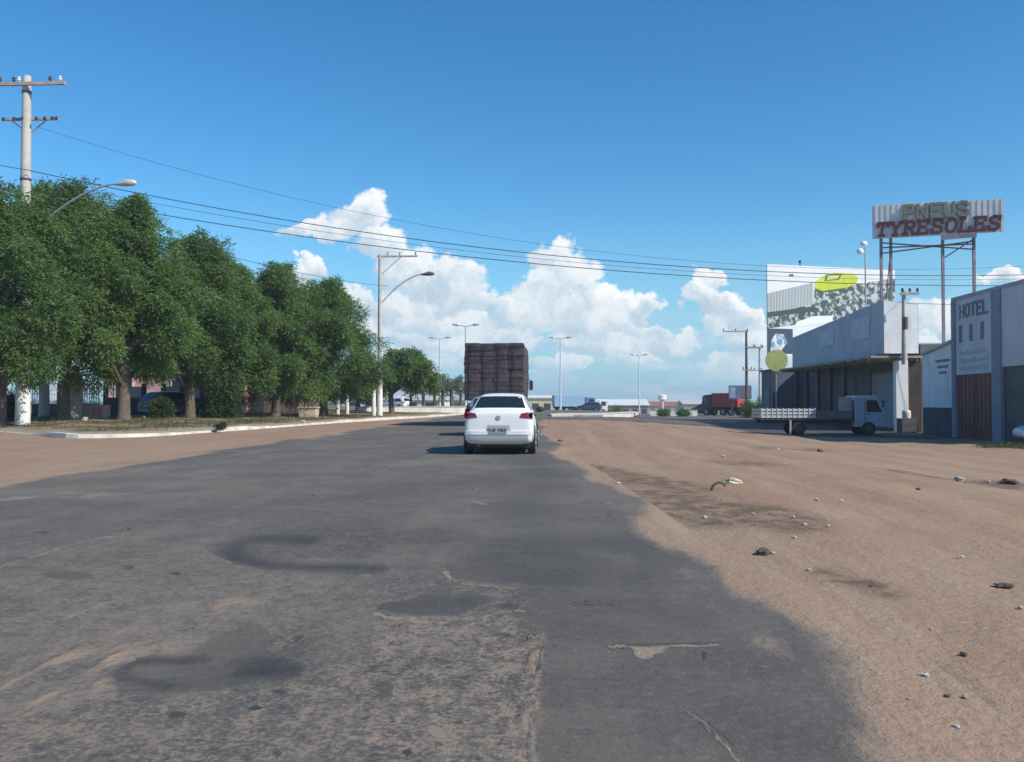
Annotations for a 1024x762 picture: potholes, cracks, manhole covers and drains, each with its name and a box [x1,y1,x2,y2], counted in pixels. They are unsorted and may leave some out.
pothole [627,645,670,660]
crack [459,582,517,590]
pothole [83,620,305,703]
crack [682,707,740,762]
pothole [495,602,524,610]
pothole [205,531,399,579]
